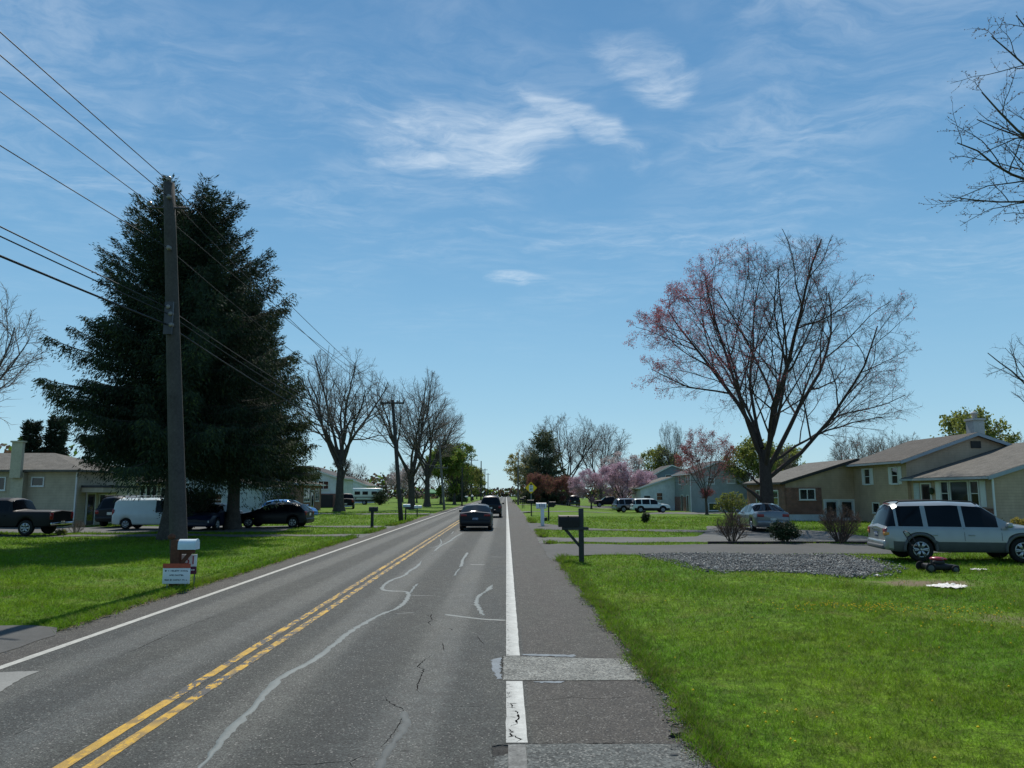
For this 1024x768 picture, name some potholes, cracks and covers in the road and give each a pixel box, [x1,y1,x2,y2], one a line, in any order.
crack [362,614,453,747]
